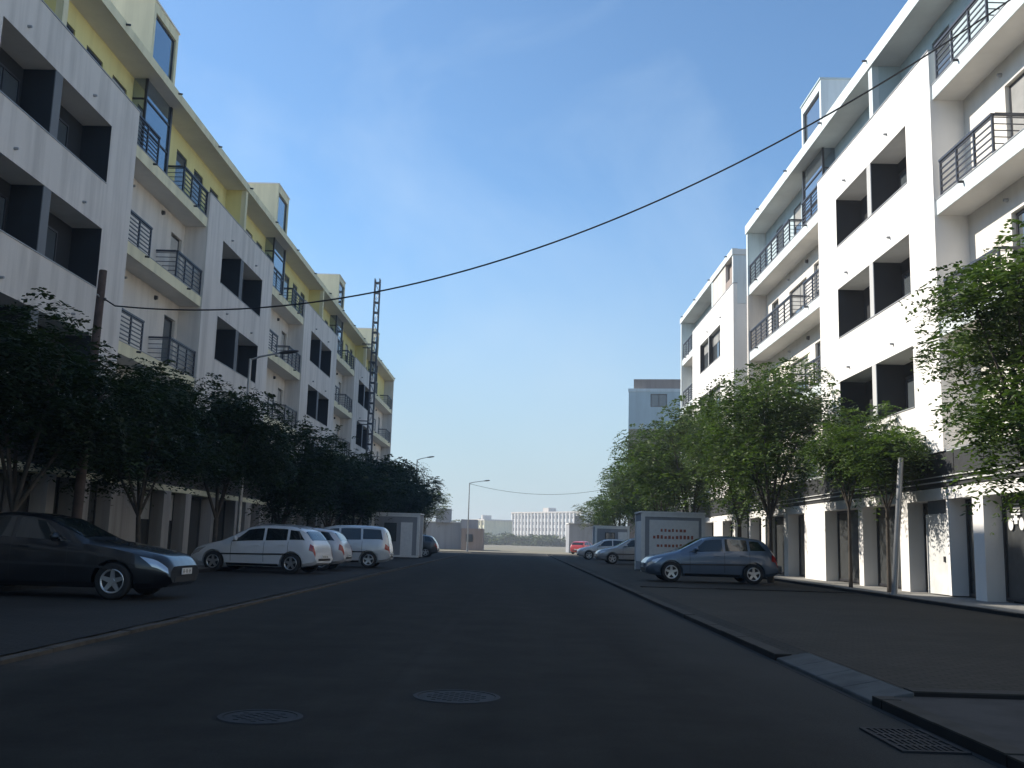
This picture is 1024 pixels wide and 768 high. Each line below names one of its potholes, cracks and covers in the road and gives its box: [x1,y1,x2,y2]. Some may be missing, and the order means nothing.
manhole cover [409,689,505,704]
manhole cover [211,709,307,725]
drain grate [859,727,972,755]
